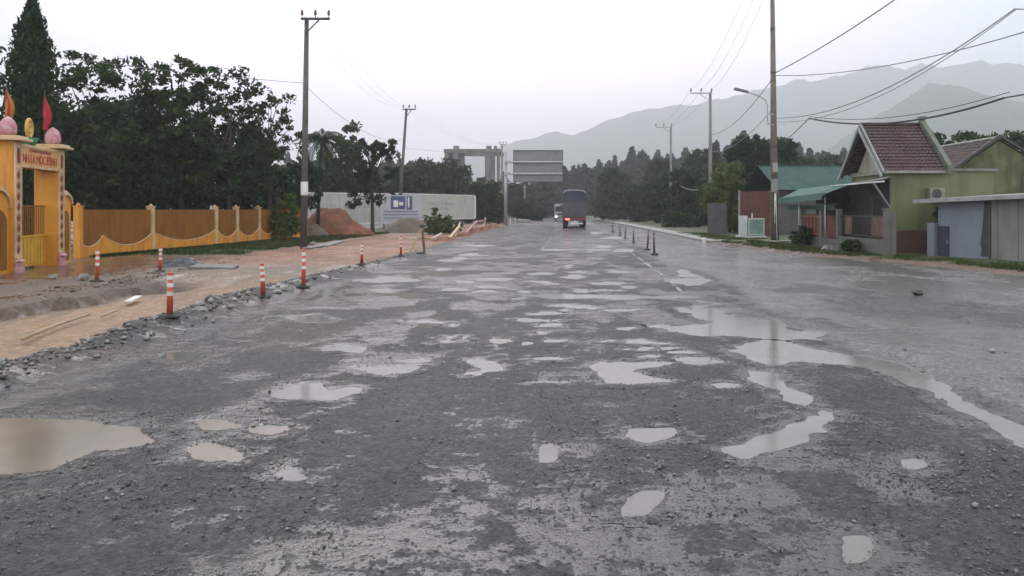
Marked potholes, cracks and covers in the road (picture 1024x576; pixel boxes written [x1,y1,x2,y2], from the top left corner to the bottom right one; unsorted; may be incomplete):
pothole [151,436,282,471]
pothole [245,378,377,406]
pothole [573,357,689,390]
pothole [163,411,277,438]
pothole [604,420,708,450]
pothole [0,410,187,479]
pothole [229,417,320,442]
pothole [443,355,528,382]
